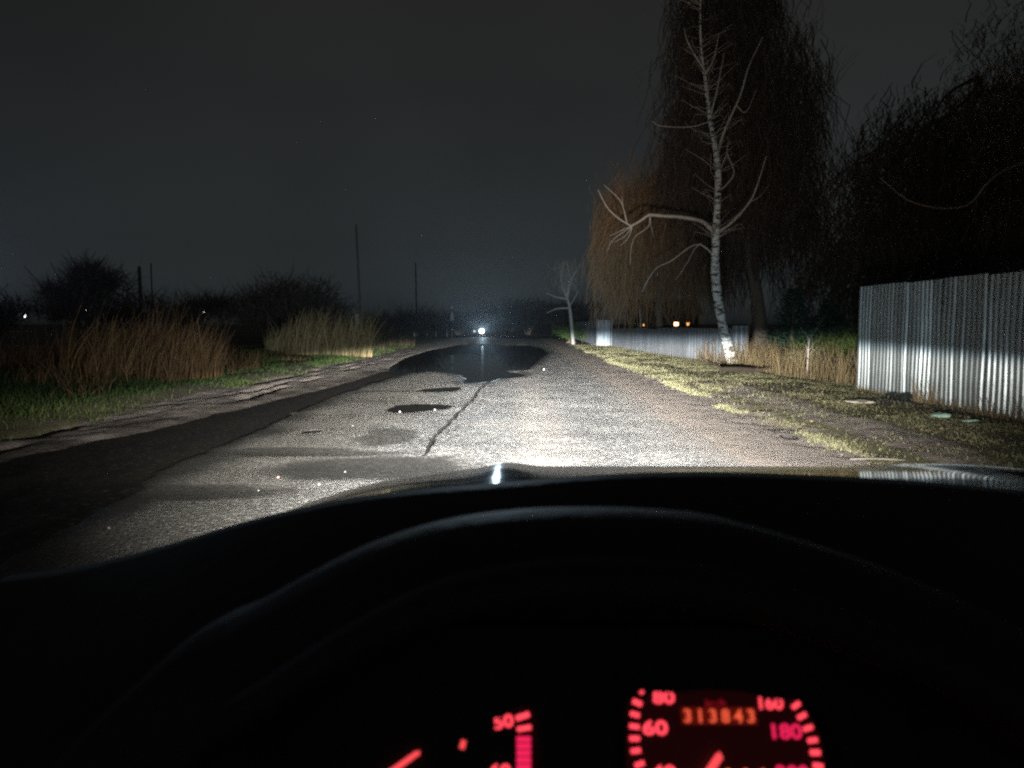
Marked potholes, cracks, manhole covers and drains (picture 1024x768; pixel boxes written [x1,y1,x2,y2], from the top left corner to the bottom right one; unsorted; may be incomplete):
crack [422,382,488,456]
pothole [376,402,466,414]
